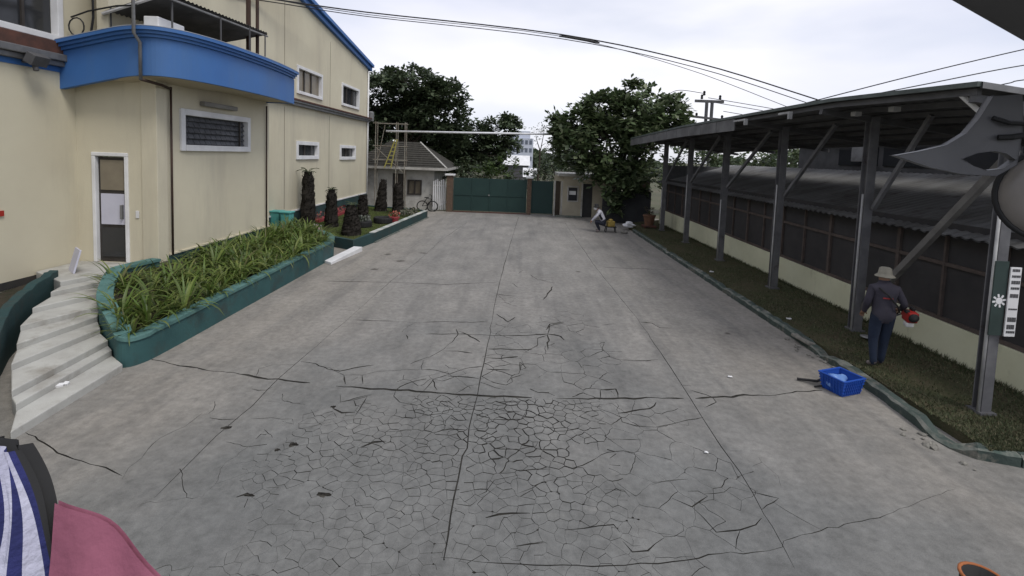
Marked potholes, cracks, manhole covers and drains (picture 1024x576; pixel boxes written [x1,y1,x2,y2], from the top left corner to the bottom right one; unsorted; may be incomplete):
crack [143,280,954,576]
crack [25,414,201,479]
